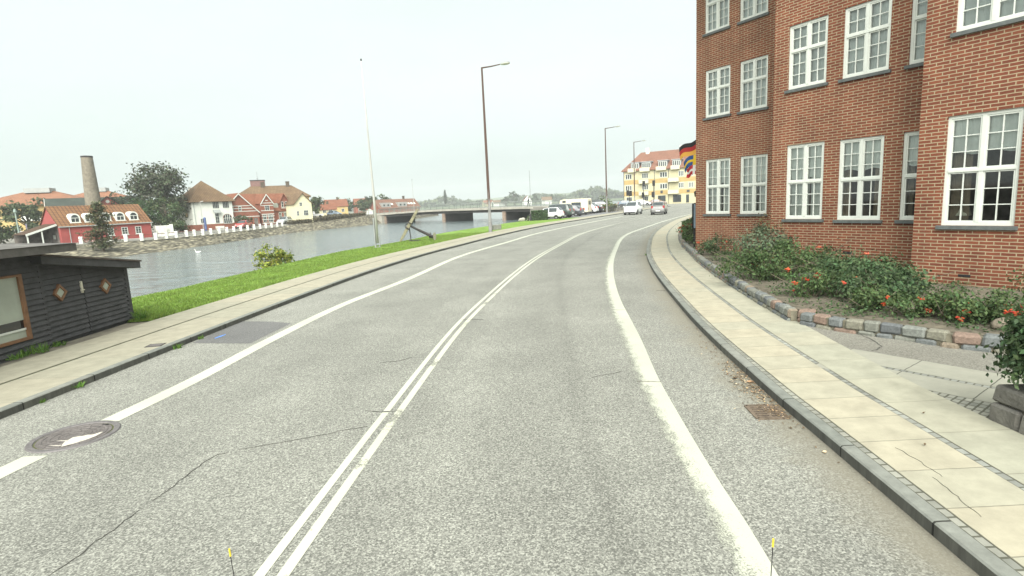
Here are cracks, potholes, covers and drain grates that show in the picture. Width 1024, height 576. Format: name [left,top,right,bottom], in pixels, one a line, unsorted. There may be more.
drain grate [744,404,789,420]
crack [49,411,394,576]
manhole cover [24,420,121,453]
